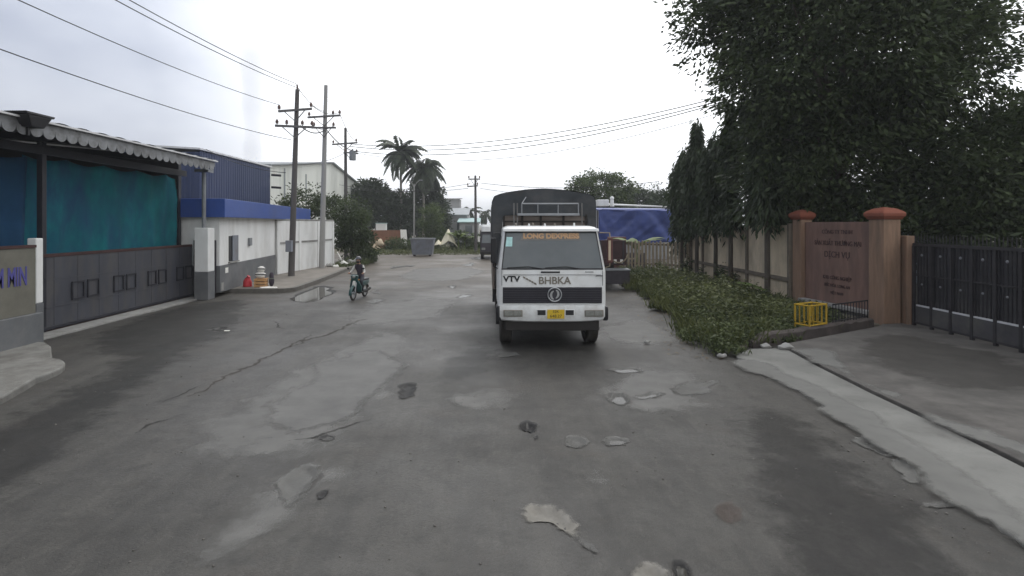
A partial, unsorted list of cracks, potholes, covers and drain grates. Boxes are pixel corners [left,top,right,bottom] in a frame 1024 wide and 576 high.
pothole [520,420,537,439]
crack [294,422,359,440]
pothole [608,392,630,405]
pothole [673,560,691,576]
pothole [398,382,417,399]
